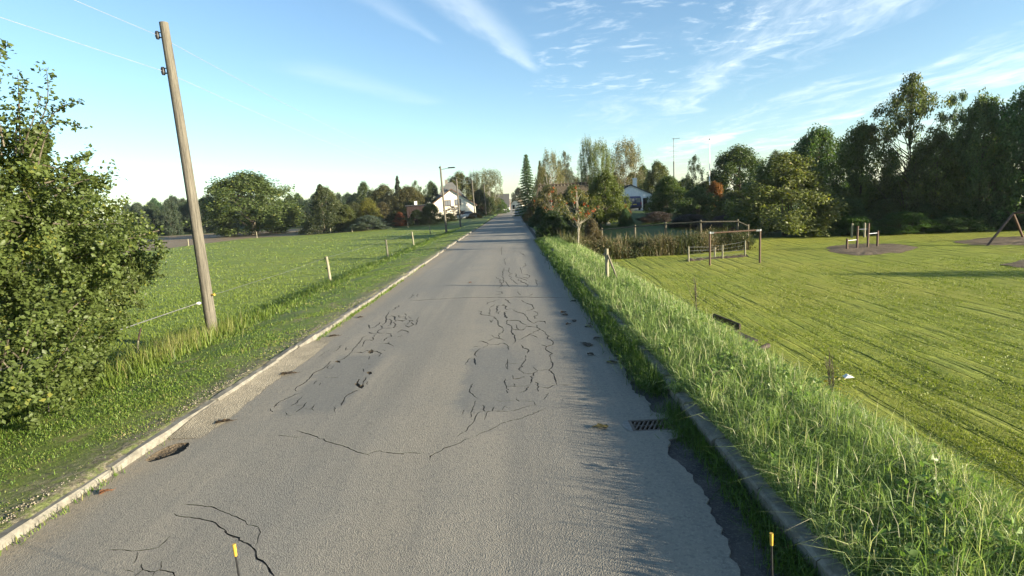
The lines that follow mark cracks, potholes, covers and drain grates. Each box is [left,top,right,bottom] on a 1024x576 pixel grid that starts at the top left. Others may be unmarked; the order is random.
drain grate [622,418,675,431]
pothole [145,443,190,462]
crack [126,540,175,576]
crack [176,504,274,576]
crack [270,248,557,458]
